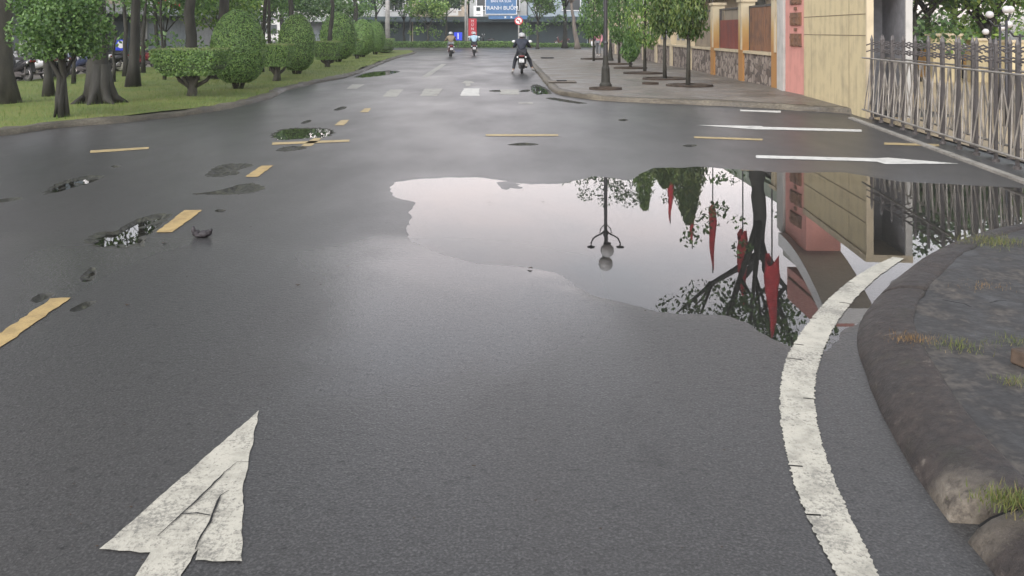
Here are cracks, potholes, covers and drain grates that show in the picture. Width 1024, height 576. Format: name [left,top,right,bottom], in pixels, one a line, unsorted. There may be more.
pothole [70,301,96,312]
pothole [31,293,54,303]
pothole [271,127,335,140]
pothole [42,175,104,195]
pothole [353,70,400,78]
pothole [84,213,173,249]
pothole [195,182,265,195]
pothole [80,267,96,282]
pothole [531,84,552,95]
pothole [205,163,254,177]
